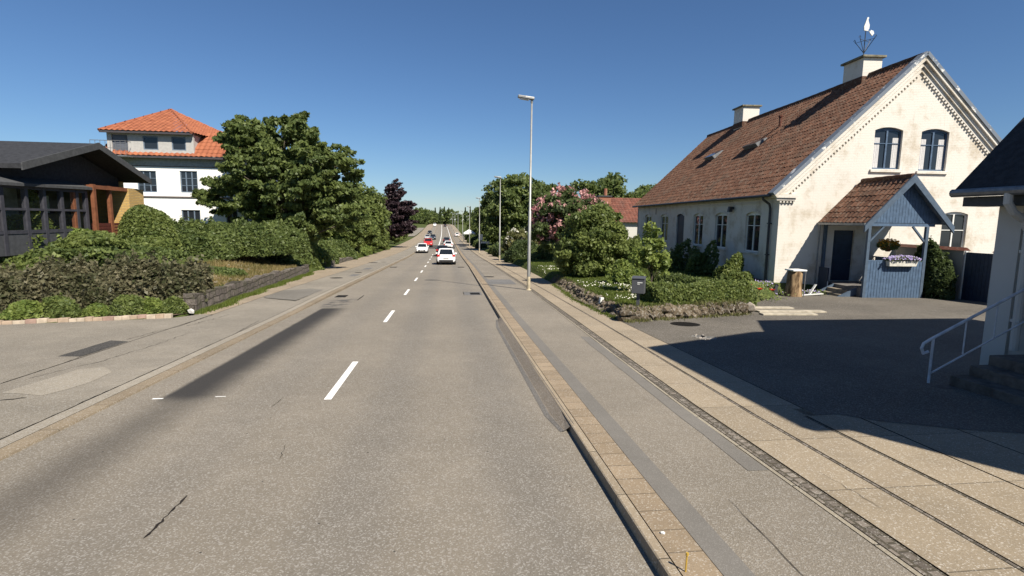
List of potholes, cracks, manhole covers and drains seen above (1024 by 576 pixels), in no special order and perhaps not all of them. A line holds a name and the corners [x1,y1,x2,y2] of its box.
crack [144,495,187,538]
crack [733,503,795,567]
